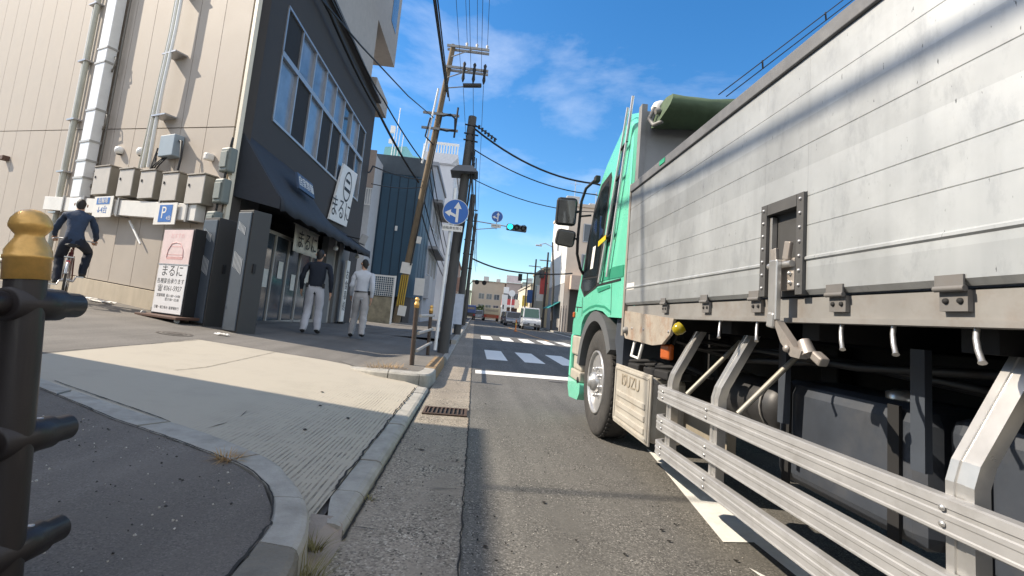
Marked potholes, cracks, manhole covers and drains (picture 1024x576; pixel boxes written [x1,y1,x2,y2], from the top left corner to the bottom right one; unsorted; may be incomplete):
drain grate [422,406,468,417]
